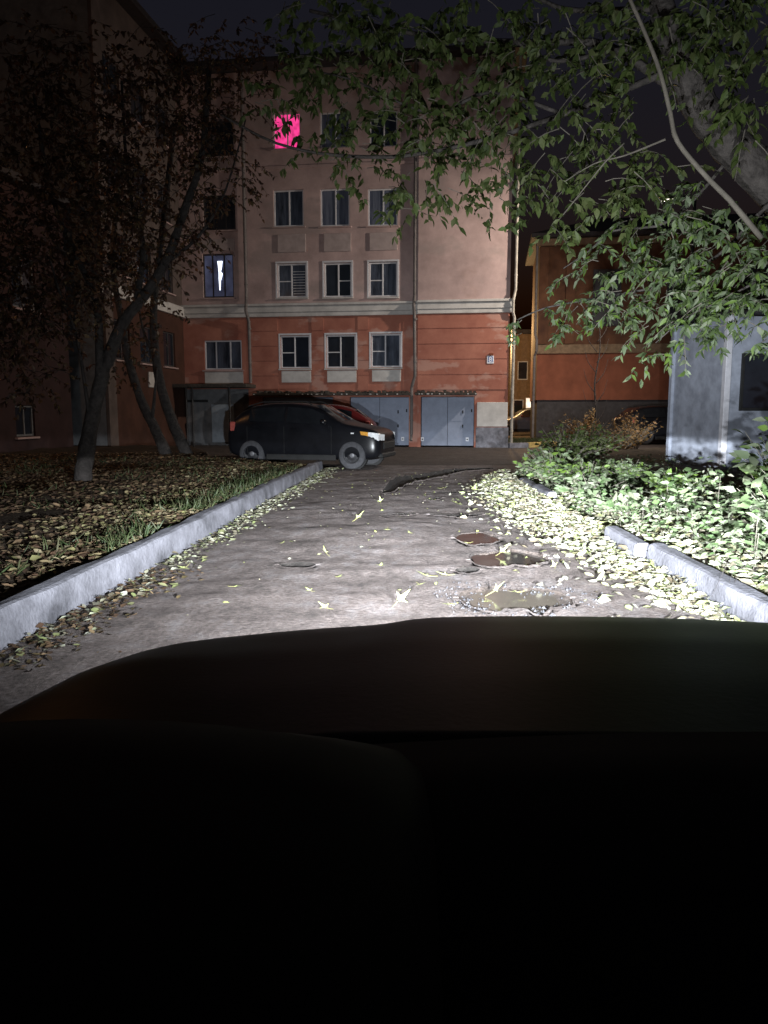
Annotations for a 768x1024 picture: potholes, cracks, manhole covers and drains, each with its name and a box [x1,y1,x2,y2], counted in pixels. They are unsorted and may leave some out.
pothole [450,531,504,546]
pothole [451,584,580,616]
pothole [465,547,555,569]
pothole [273,561,322,569]
